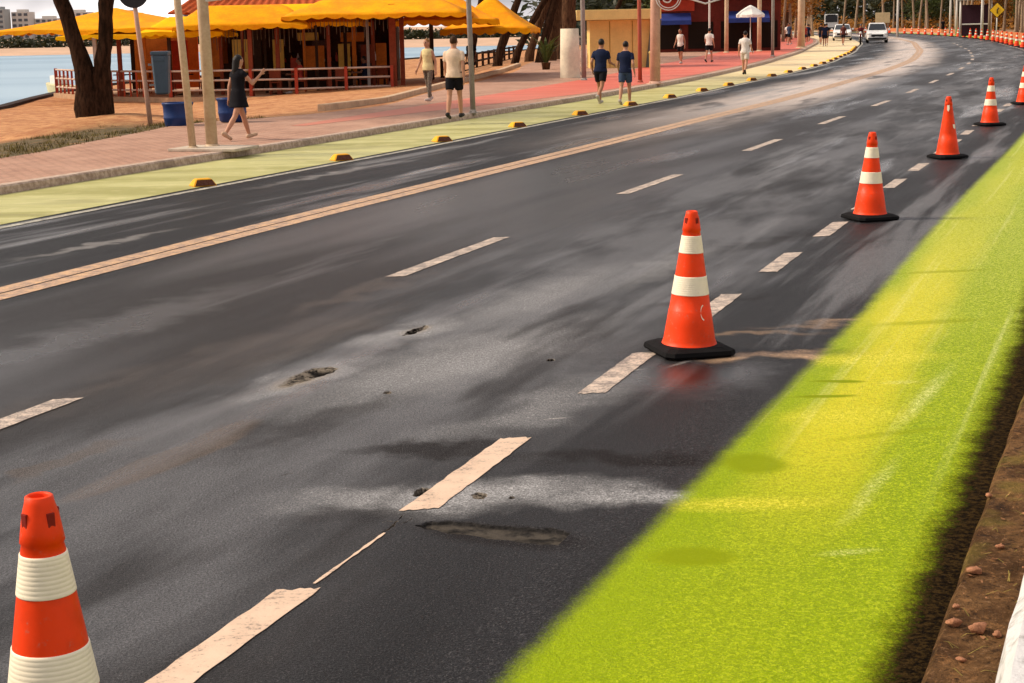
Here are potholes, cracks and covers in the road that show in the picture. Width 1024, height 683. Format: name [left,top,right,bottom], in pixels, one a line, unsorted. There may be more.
pothole [415,520,572,546]
crack [382,514,413,533]
pothole [402,325,429,336]
pothole [277,366,339,388]
